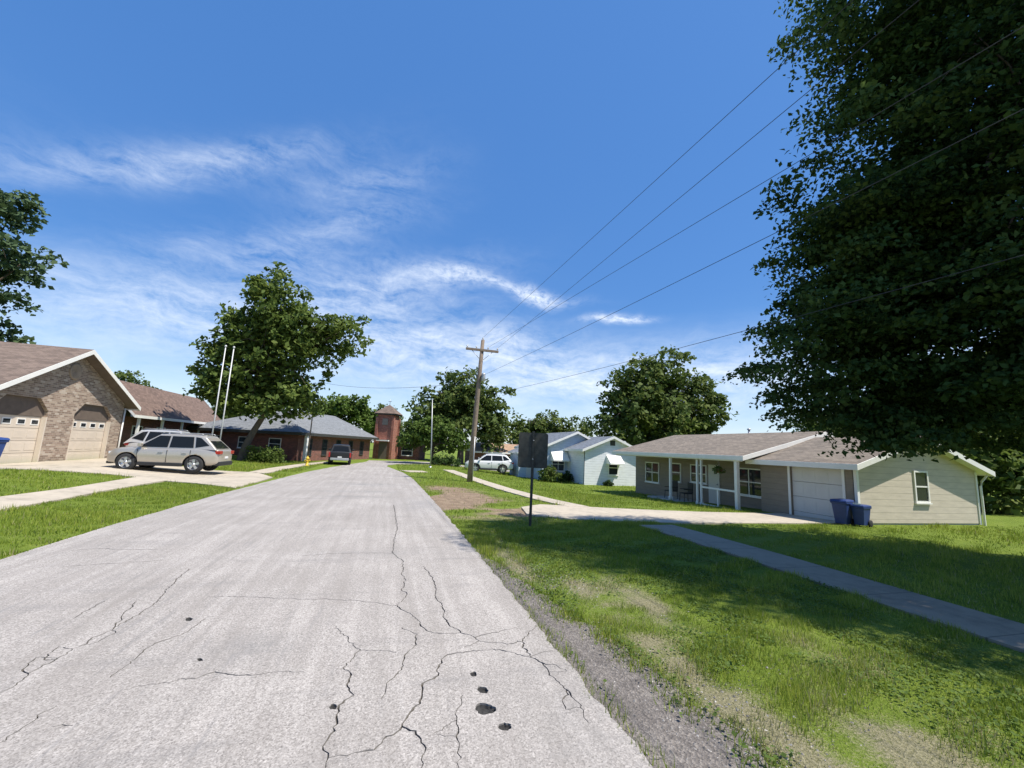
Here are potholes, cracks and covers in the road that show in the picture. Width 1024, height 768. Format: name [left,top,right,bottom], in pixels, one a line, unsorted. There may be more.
crack [133,671,291,688]
crack [110,619,205,677]
crack [0,569,189,693]
pothole [475,703,496,715]
crack [226,505,588,768]
